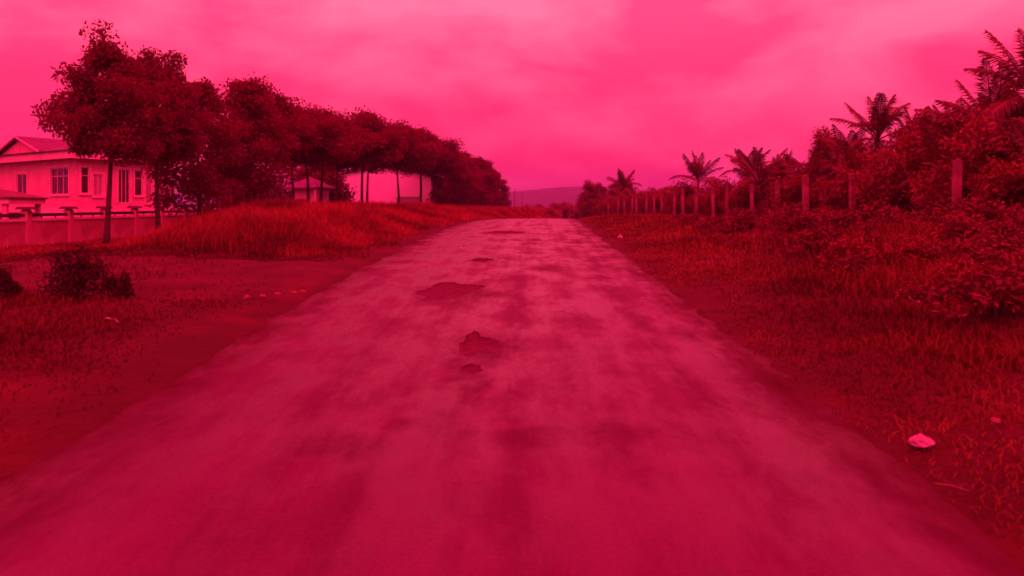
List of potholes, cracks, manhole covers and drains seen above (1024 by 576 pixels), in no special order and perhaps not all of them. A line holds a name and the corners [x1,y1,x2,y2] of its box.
pothole [460,363,483,375]
pothole [459,331,500,357]
pothole [416,282,486,300]
